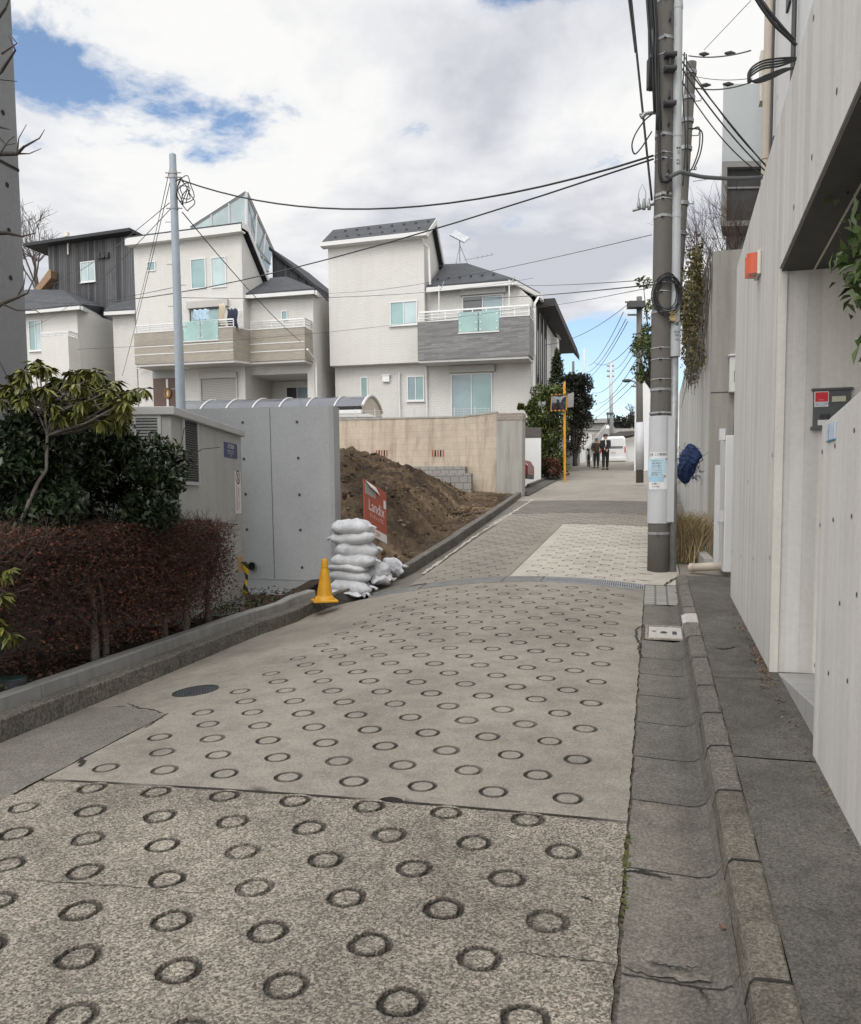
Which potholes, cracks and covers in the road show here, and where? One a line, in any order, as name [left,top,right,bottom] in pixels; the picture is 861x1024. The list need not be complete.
crack [646,960,702,970]
manhole cover [645,625,684,641]
drain grate [542,576,645,591]
crack [517,951,611,965]
crack [16,878,207,893]
manhole cover [172,684,219,697]
